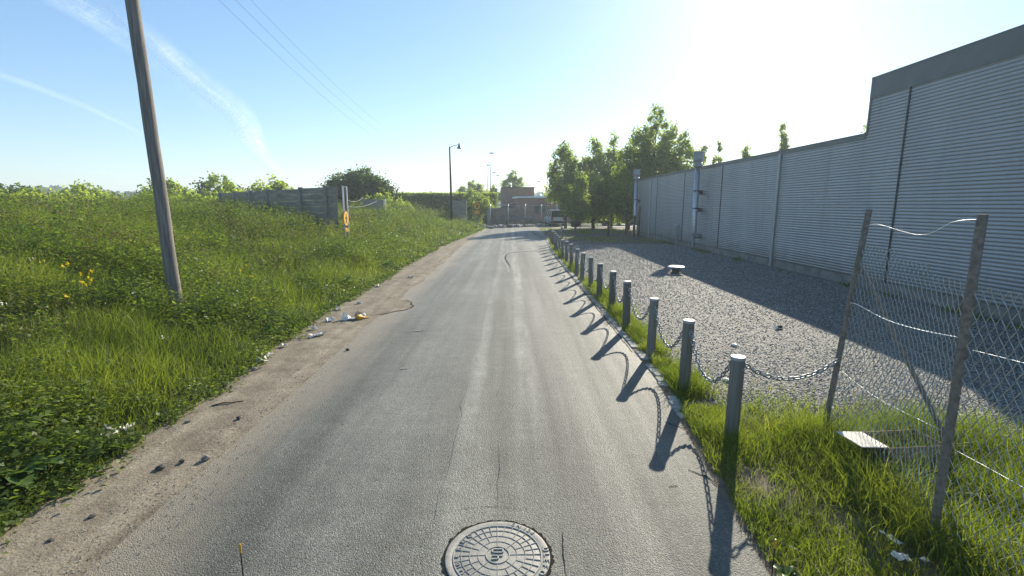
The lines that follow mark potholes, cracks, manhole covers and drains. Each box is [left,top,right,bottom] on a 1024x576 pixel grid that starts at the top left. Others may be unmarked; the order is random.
manhole cover [441,520,555,576]
